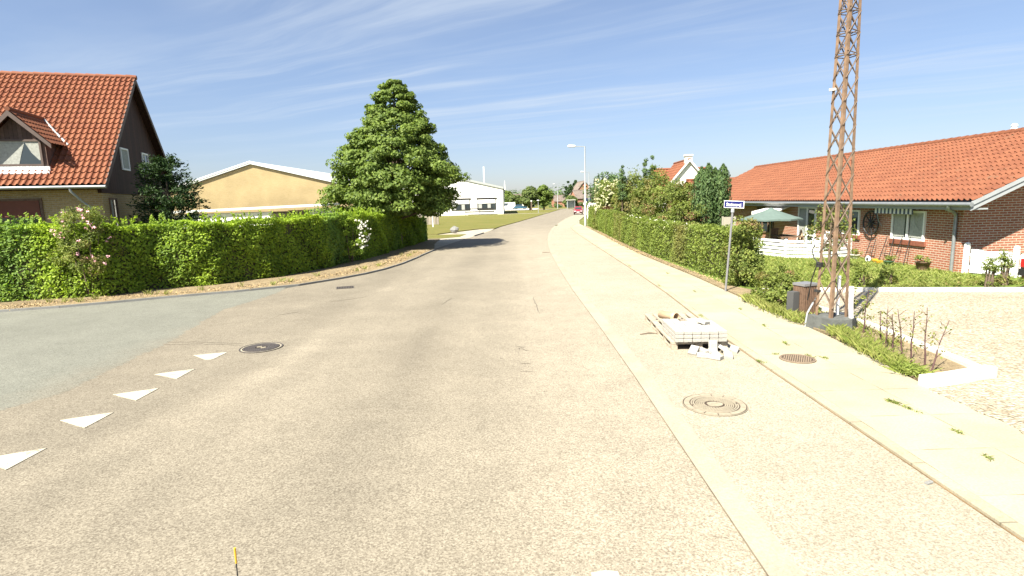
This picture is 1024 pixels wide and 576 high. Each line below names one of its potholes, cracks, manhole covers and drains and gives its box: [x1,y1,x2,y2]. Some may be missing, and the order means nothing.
manhole cover [779,354,817,364]
manhole cover [682,393,748,417]
manhole cover [239,342,283,353]
